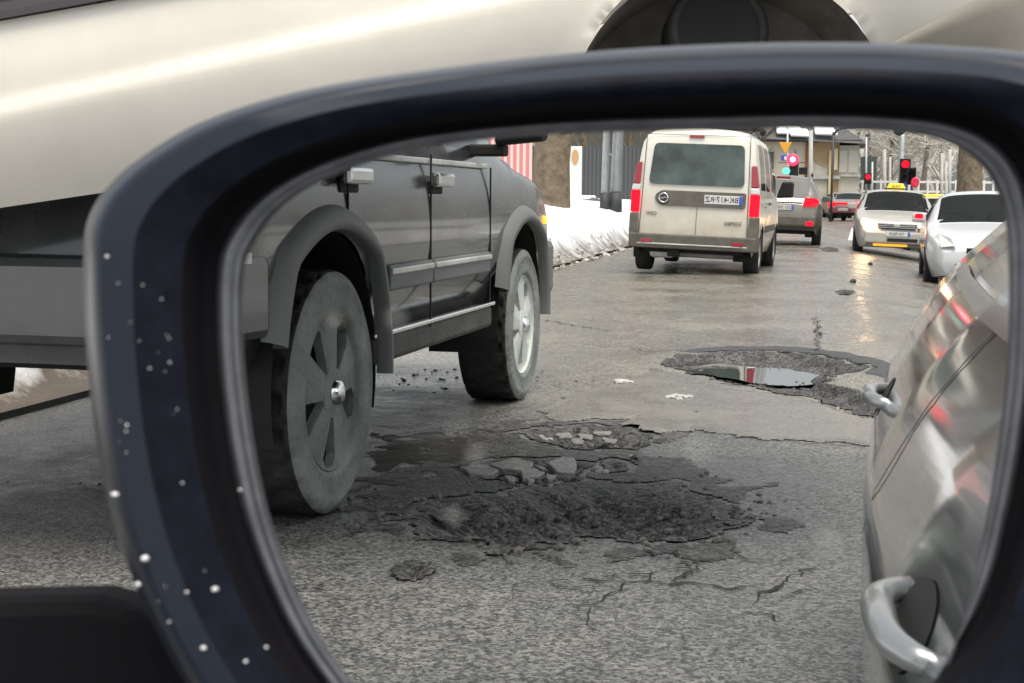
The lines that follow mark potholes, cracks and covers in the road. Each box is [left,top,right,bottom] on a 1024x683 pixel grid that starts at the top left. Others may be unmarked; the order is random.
pothole [389,559,435,581]
pothole [661,350,875,417]
pothole [513,424,653,450]
pothole [375,480,753,557]
crack [776,317,877,367]
pothole [474,458,593,483]
pothole [602,459,628,472]
crack [548,547,833,632]
